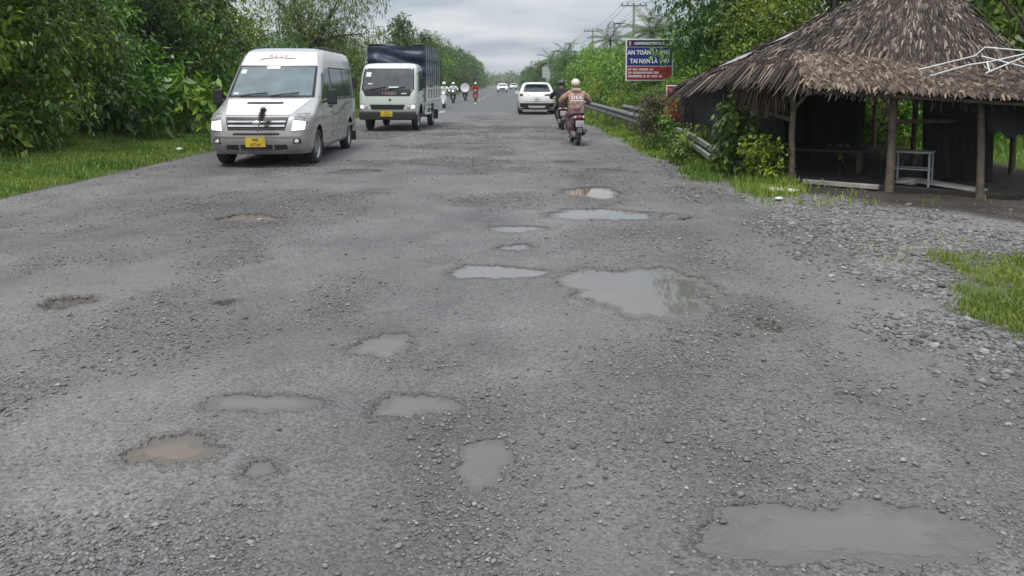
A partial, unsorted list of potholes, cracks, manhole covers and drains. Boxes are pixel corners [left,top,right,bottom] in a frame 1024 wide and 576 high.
pothole [362,390,478,424]
pothole [549,185,631,201]
pothole [103,427,235,474]
pothole [439,263,570,281]
pothole [440,432,530,503]
pothole [227,454,291,486]
pothole [681,491,1020,576]
pothole [205,212,298,224]
pothole [192,391,336,419]
pothole [745,315,791,336]
pothole [336,330,421,362]
pothole [537,206,688,222]
